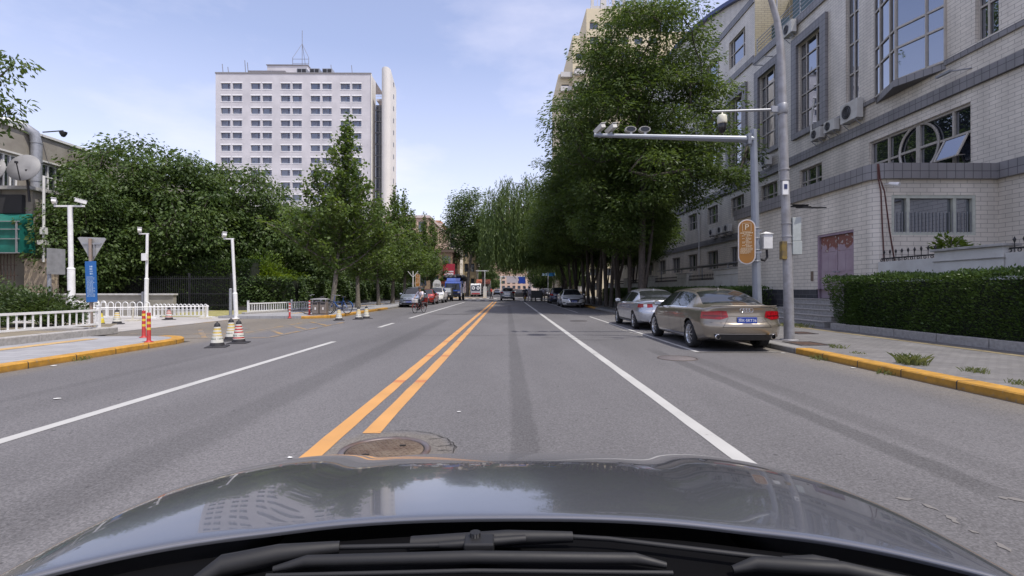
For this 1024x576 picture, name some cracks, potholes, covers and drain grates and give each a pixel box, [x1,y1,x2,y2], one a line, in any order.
manhole cover [337,437,431,457]
